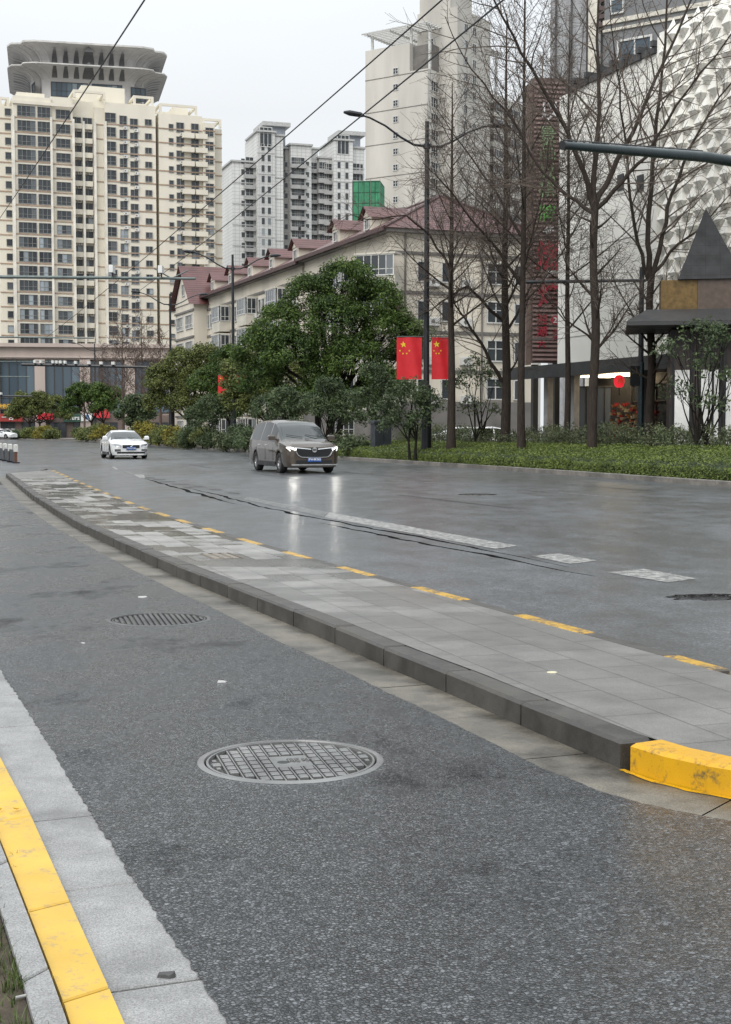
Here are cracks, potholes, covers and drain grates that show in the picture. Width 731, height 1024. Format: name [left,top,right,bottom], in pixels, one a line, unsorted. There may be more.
manhole cover [197,739,384,784]
manhole cover [107,612,211,627]
